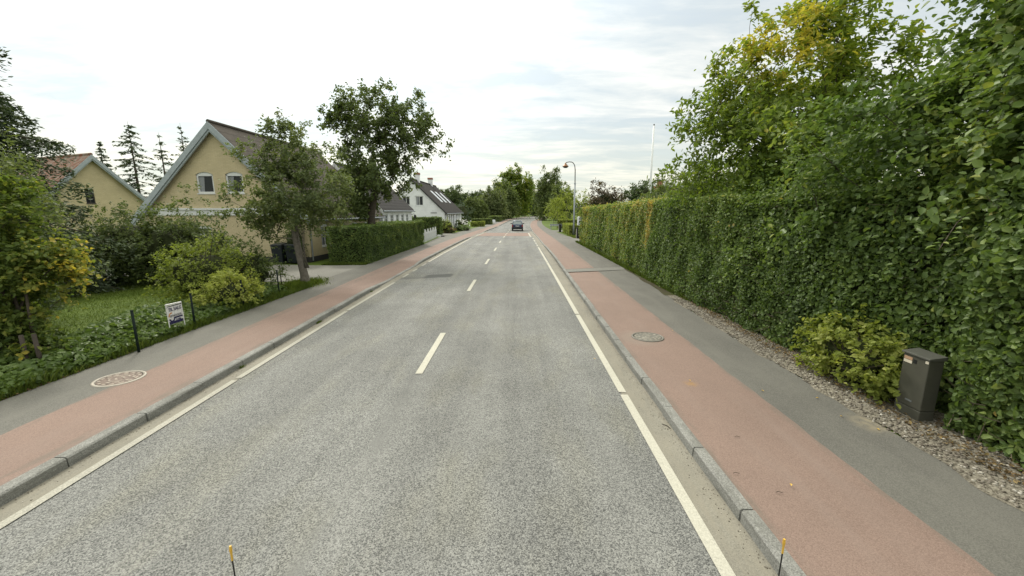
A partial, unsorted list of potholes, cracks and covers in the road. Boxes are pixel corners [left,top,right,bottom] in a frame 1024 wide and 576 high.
manhole cover [90,370,147,388]
manhole cover [631,332,664,342]
